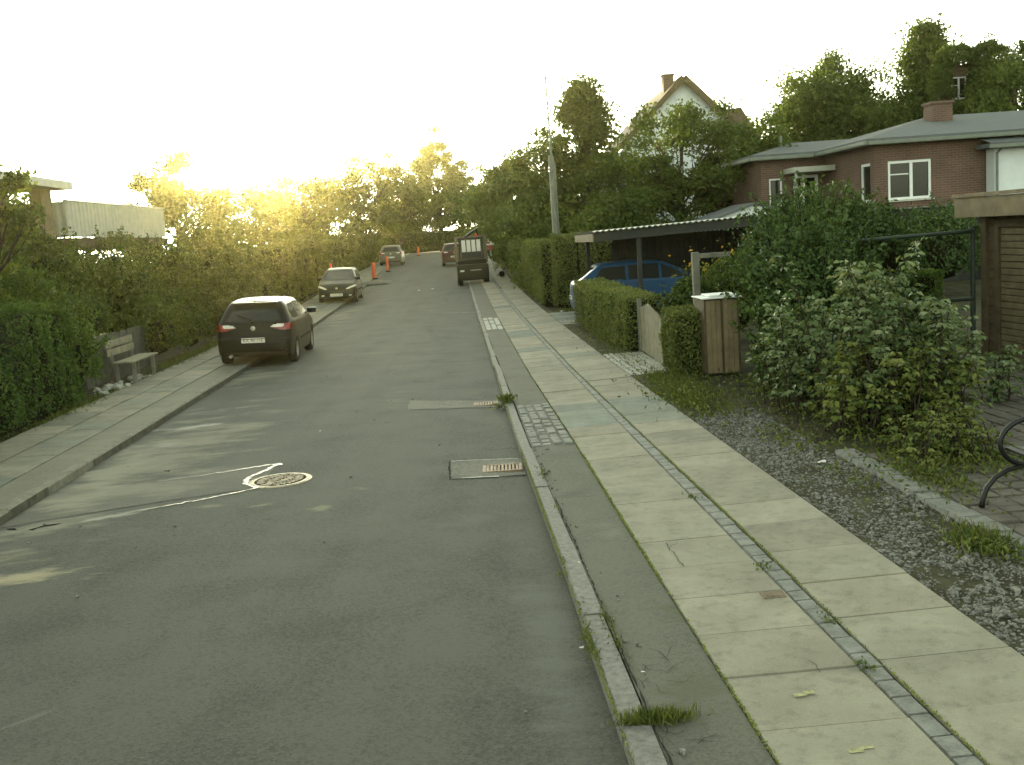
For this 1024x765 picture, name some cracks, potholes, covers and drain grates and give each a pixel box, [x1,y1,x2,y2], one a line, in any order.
manhole cover [249,473,312,488]
drain grate [483,462,523,472]
utility cover [759,590,787,599]
